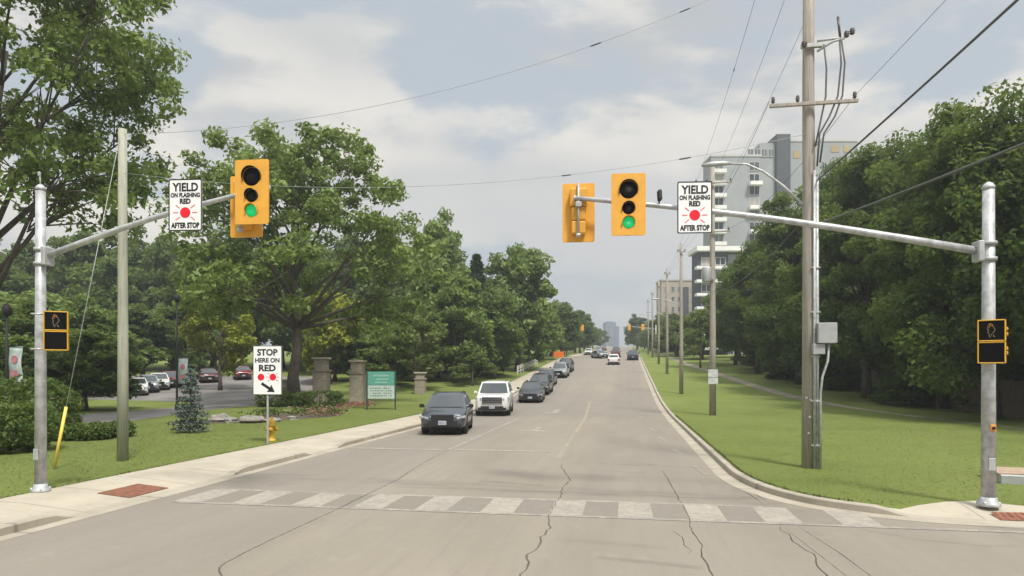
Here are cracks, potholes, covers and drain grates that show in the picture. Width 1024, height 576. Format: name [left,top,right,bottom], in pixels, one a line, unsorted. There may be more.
crack [519,465,571,576]
crack [632,462,713,576]
crack [780,526,846,576]
